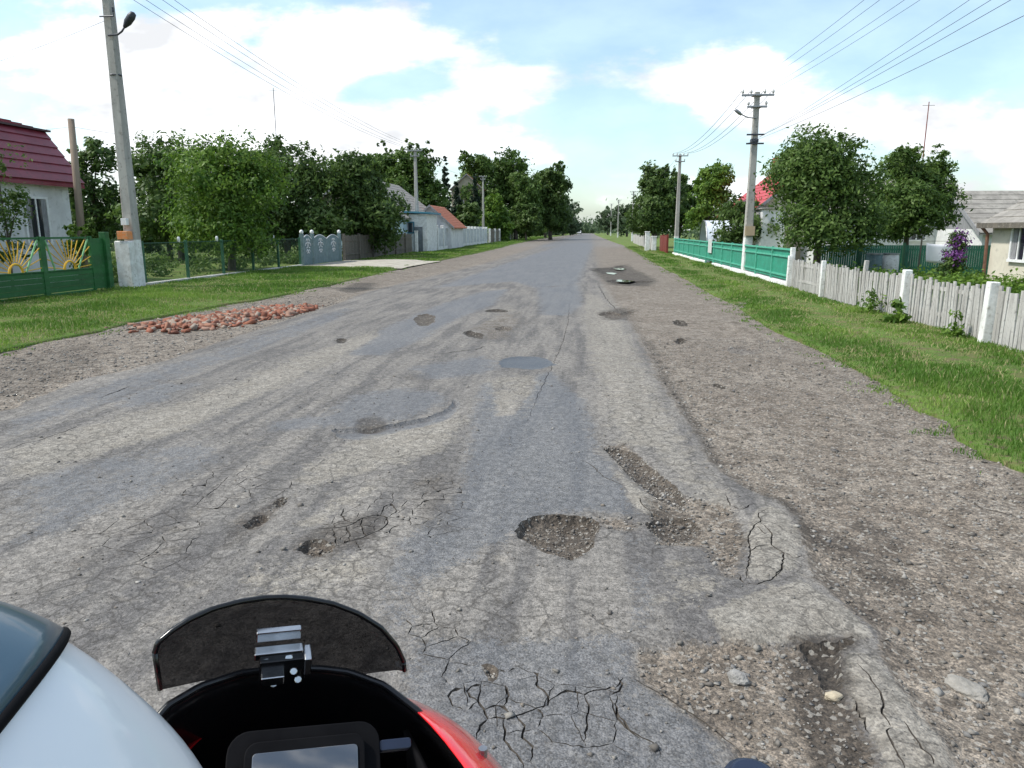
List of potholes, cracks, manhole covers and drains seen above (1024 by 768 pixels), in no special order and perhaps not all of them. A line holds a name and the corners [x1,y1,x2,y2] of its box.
pothole [603,447,685,510]
pothole [242,515,270,530]
crack [406,611,742,768]
pothole [331,400,460,440]
crack [310,478,471,551]
crack [726,496,801,585]
pothole [298,538,335,557]
pothole [646,518,701,545]
pothole [514,514,601,561]
pothole [463,330,485,339]
